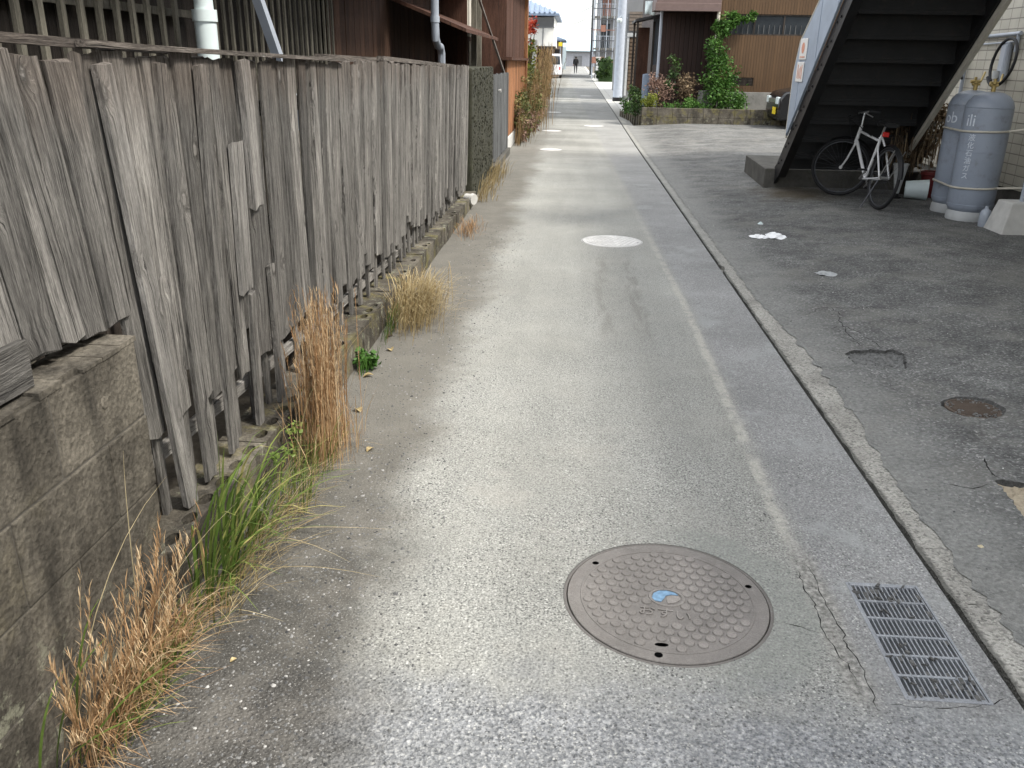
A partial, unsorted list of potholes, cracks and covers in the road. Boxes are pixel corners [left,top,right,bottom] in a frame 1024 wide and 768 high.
manhole cover [581,235,643,247]
crack [806,307,883,353]
crack [949,458,999,489]
pothole [845,349,907,369]
manhole cover [563,544,774,668]
manhole cover [940,396,1006,419]
drain grate [845,582,994,705]
crack [786,566,1006,710]
